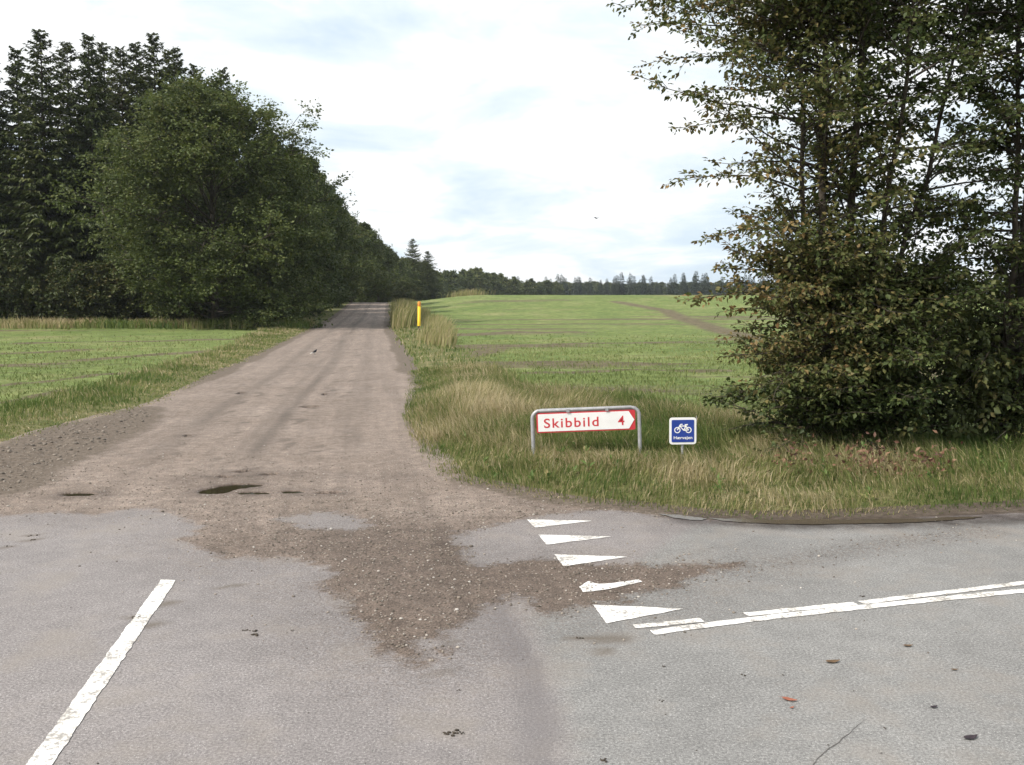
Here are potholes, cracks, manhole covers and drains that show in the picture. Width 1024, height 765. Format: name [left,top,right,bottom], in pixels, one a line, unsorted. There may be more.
pothole [190,482,270,496]
